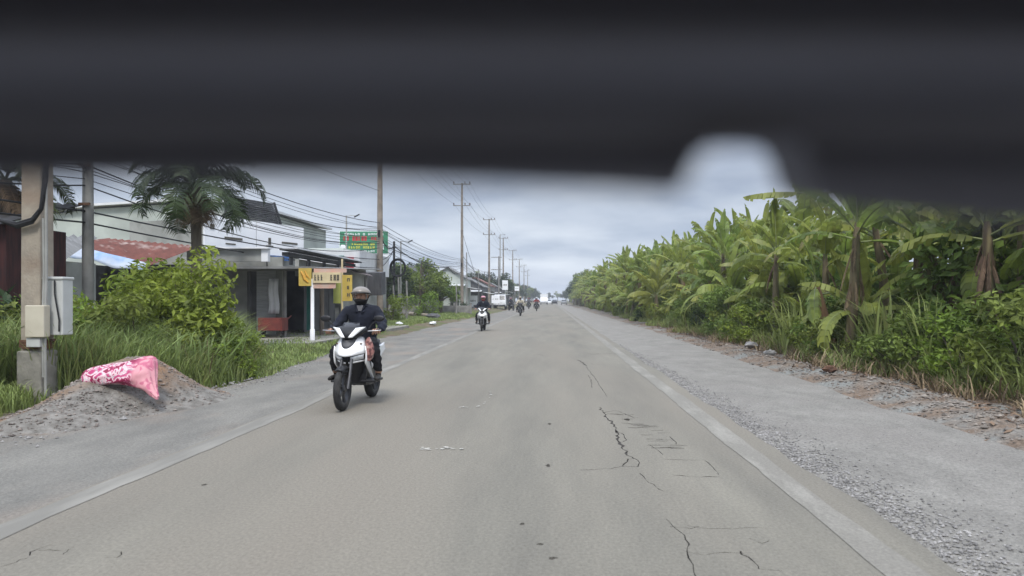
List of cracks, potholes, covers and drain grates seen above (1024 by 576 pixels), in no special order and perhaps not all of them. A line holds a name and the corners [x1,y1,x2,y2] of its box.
crack [578,360,719,491]
crack [666,519,782,576]
